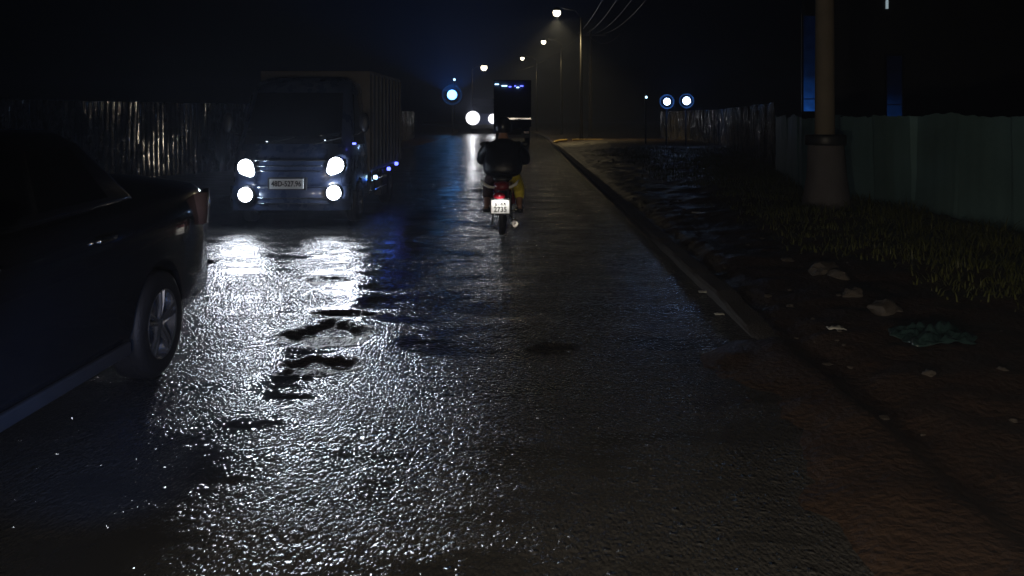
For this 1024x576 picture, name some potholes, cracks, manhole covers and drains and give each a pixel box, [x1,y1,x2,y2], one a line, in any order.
pothole [523,342,581,355]
pothole [272,354,368,377]
pothole [308,309,383,318]
pothole [273,317,378,350]
